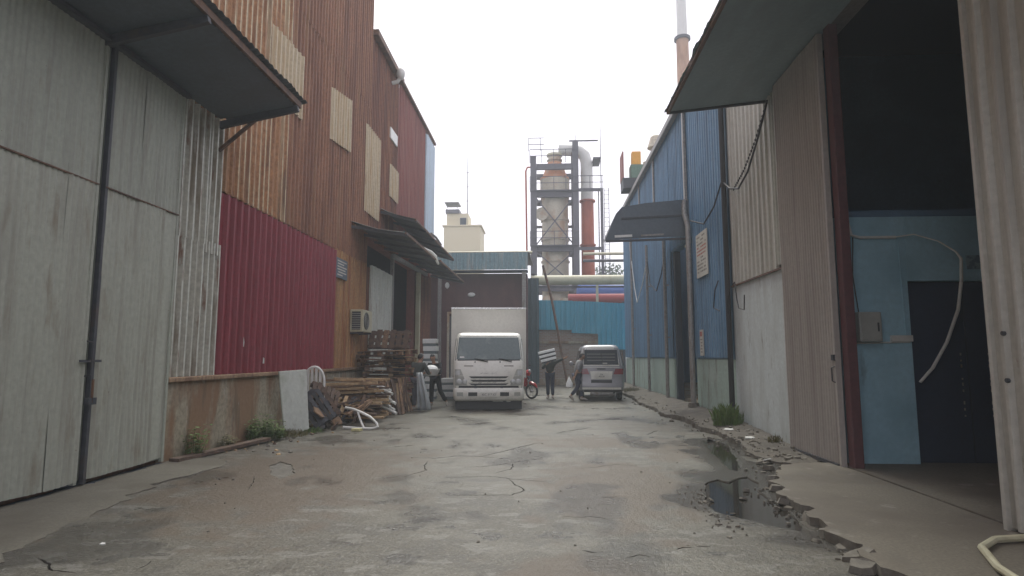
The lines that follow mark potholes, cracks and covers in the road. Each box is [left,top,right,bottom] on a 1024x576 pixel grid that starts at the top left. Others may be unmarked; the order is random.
pothole [269,461,295,479]
crack [38,558,75,573]
crack [396,443,552,496]
pothole [704,477,802,527]
